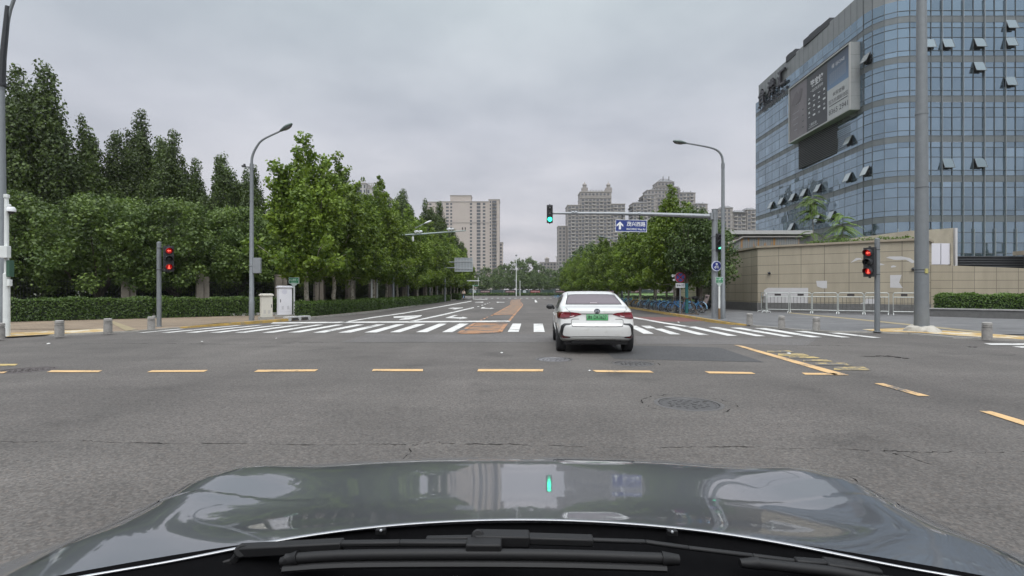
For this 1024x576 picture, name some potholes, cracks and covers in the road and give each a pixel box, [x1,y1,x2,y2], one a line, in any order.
manhole cover [654,397,725,412]
crack [801,345,909,359]
crack [1,440,1024,465]
